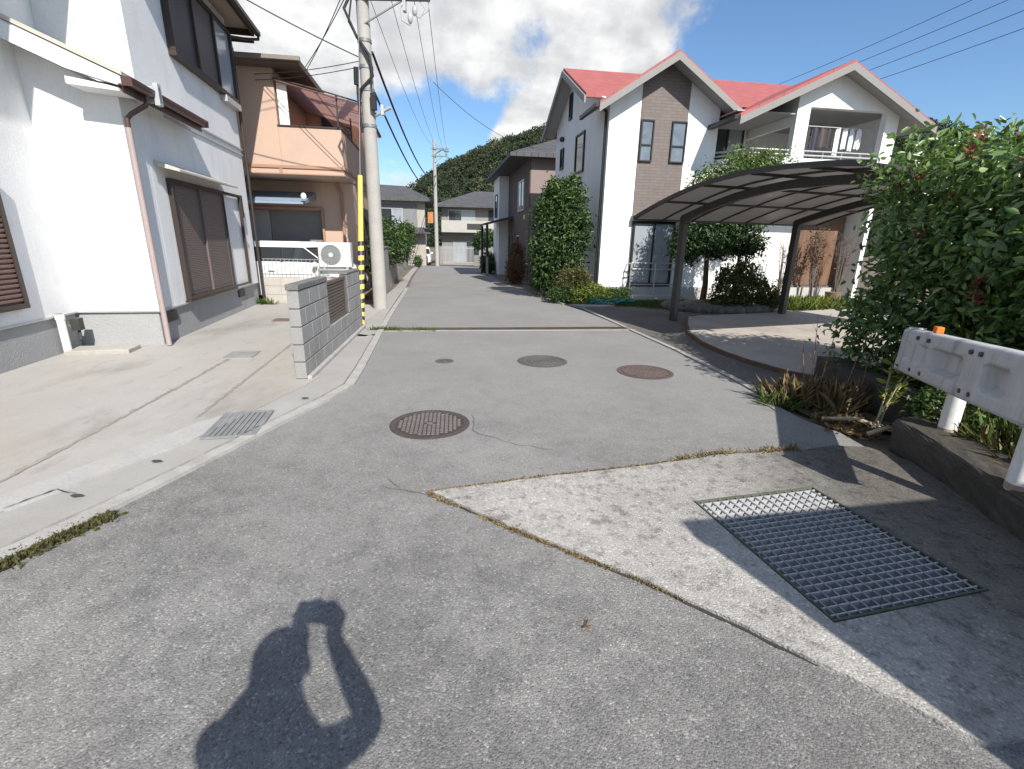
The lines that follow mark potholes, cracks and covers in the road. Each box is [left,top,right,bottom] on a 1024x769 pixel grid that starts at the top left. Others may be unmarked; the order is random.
manhole cover [389,410,470,440]
drain grate [199,410,274,440]
manhole cover [517,355,567,368]
drain grate [694,486,988,623]
manhole cover [221,351,261,359]
manhole cover [617,365,674,380]
